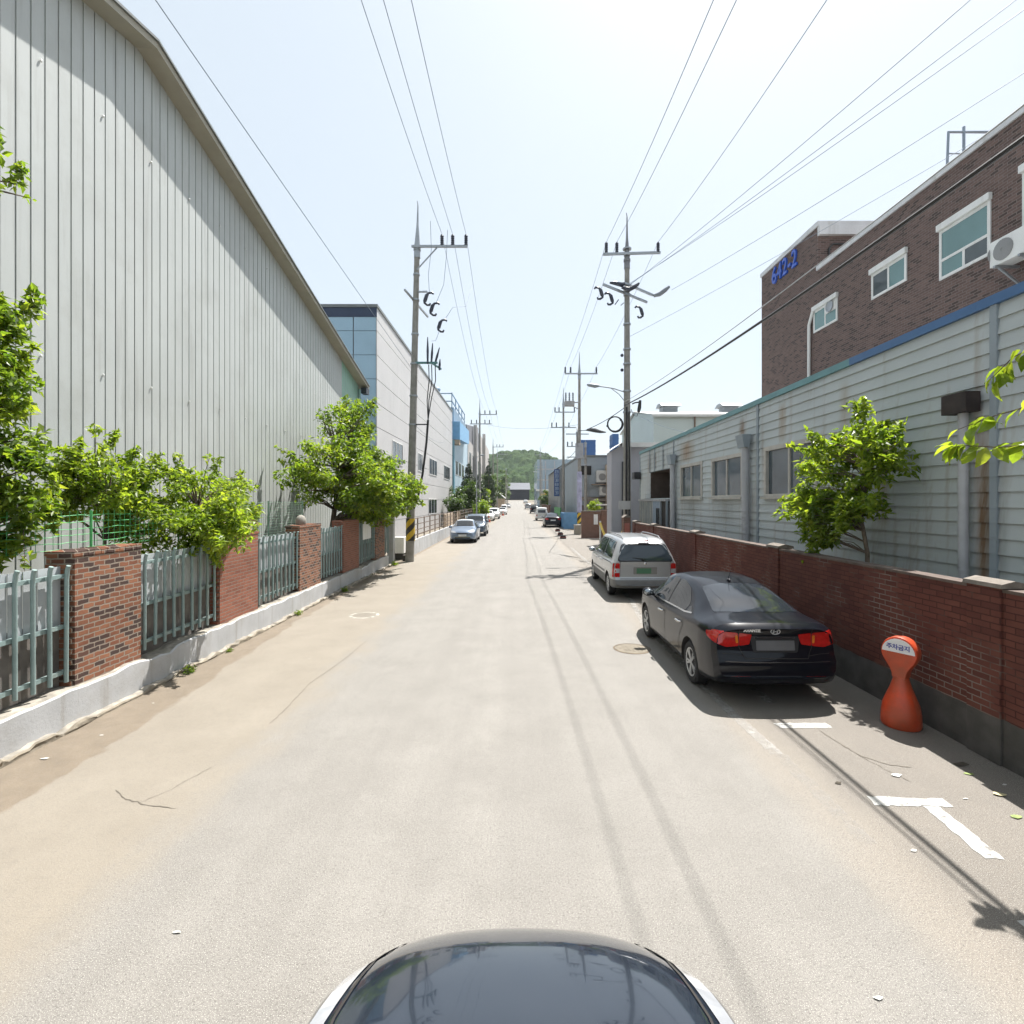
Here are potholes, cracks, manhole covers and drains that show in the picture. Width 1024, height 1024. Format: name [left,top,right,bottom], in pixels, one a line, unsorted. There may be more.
crack [116,770,205,808]
crack [824,733,911,782]
manhole cover [613,643,651,654]
